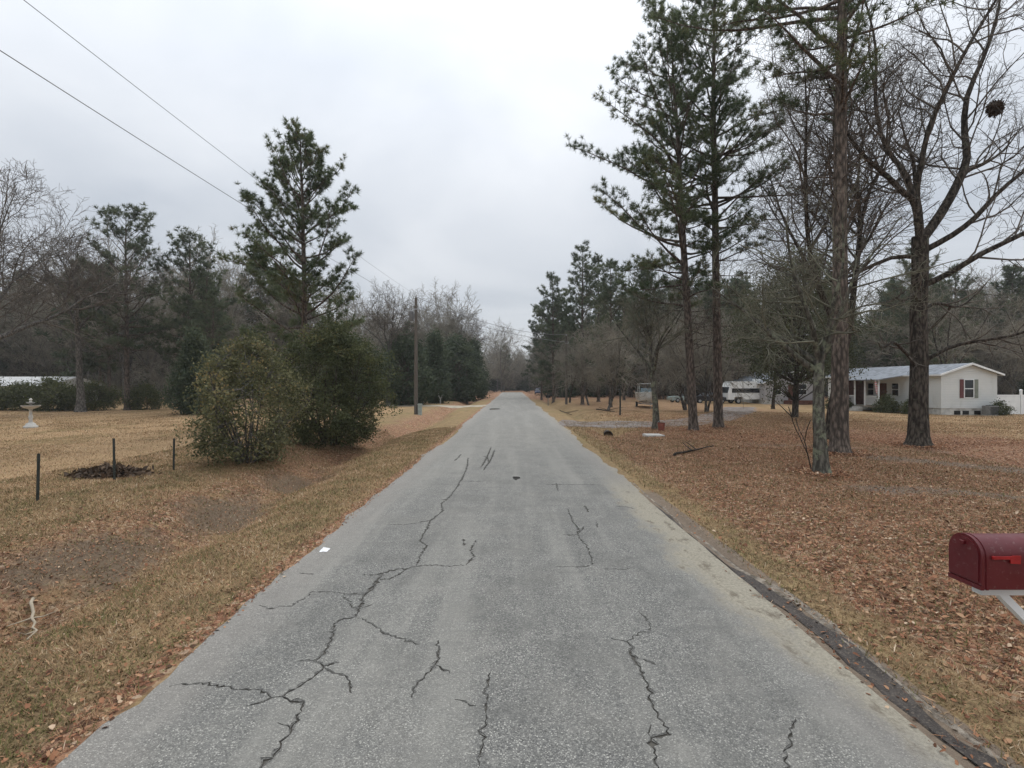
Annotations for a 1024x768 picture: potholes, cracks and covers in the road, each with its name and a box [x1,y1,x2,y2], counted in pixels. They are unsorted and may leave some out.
crack [783,717,800,768]
crack [169,448,495,768]
crack [611,611,672,768]
crack [556,506,598,567]
